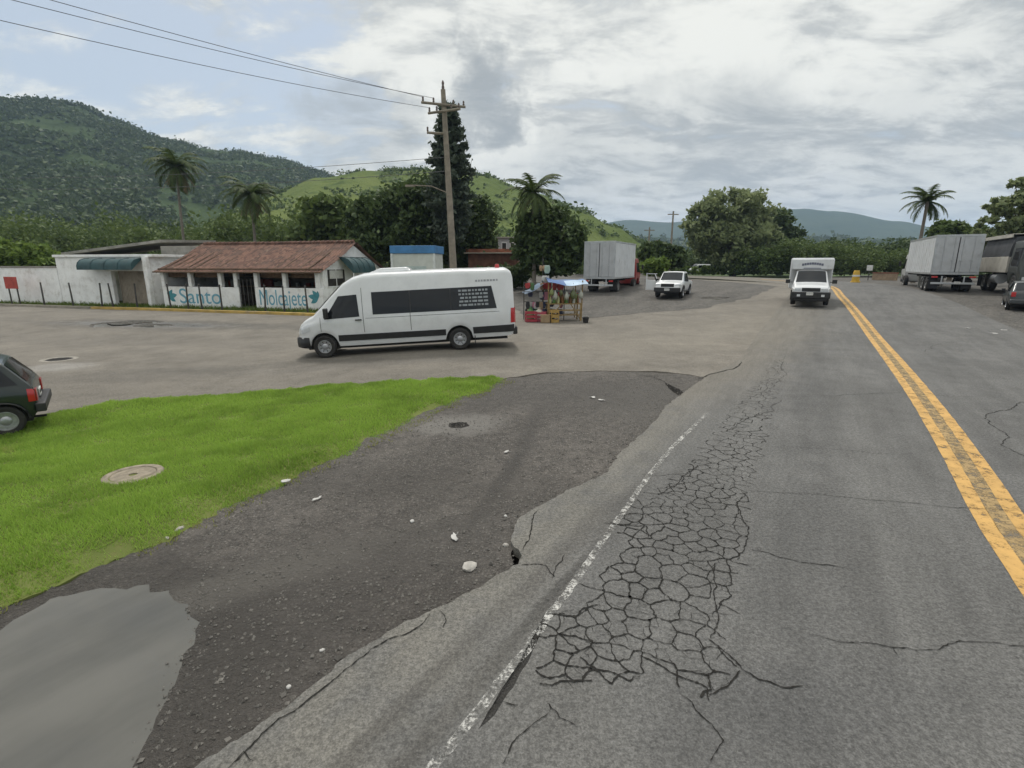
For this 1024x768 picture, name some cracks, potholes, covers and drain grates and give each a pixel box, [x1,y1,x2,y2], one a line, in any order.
crack [816,635,1020,654]
manhole cover [101,464,165,484]
crack [810,393,1024,456]
crack [479,357,844,763]
